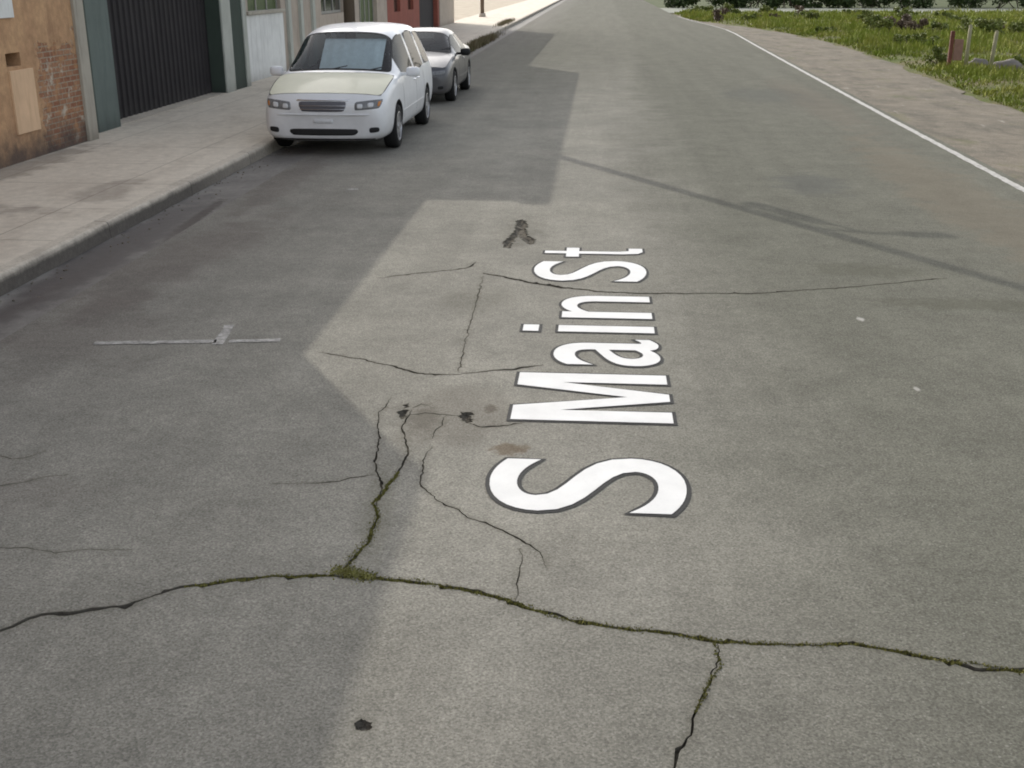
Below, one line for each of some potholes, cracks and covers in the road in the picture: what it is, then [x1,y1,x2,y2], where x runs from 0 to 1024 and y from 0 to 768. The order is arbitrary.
pothole [458,411,475,423]
crack [322,352,543,376]
crack [384,262,945,294]
crack [0,398,1024,768]
pothole [502,219,536,248]
pothole [354,719,373,731]
